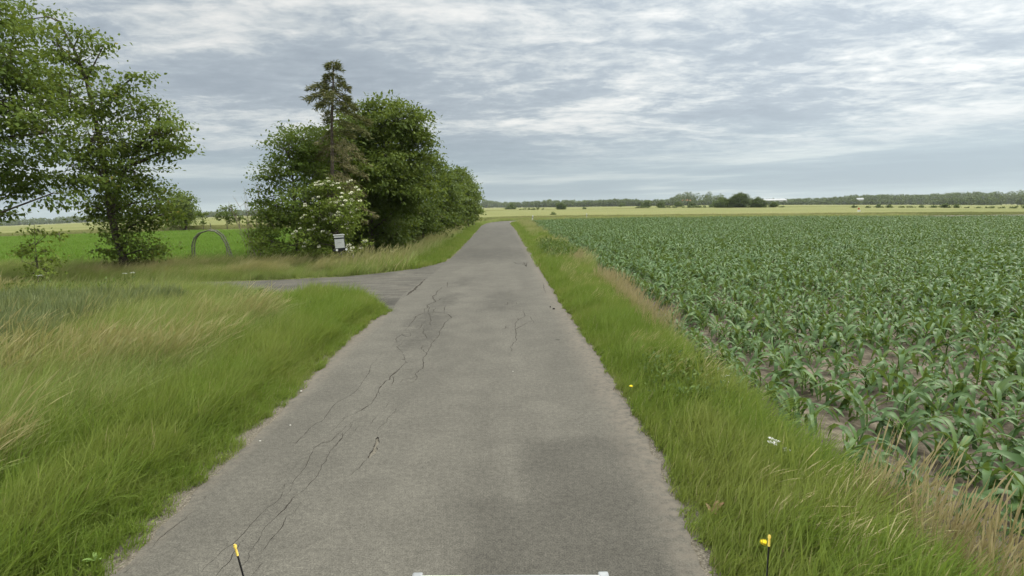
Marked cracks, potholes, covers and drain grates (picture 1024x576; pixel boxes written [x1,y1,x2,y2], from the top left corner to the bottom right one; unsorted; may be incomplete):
crack [219,282,452,572]
